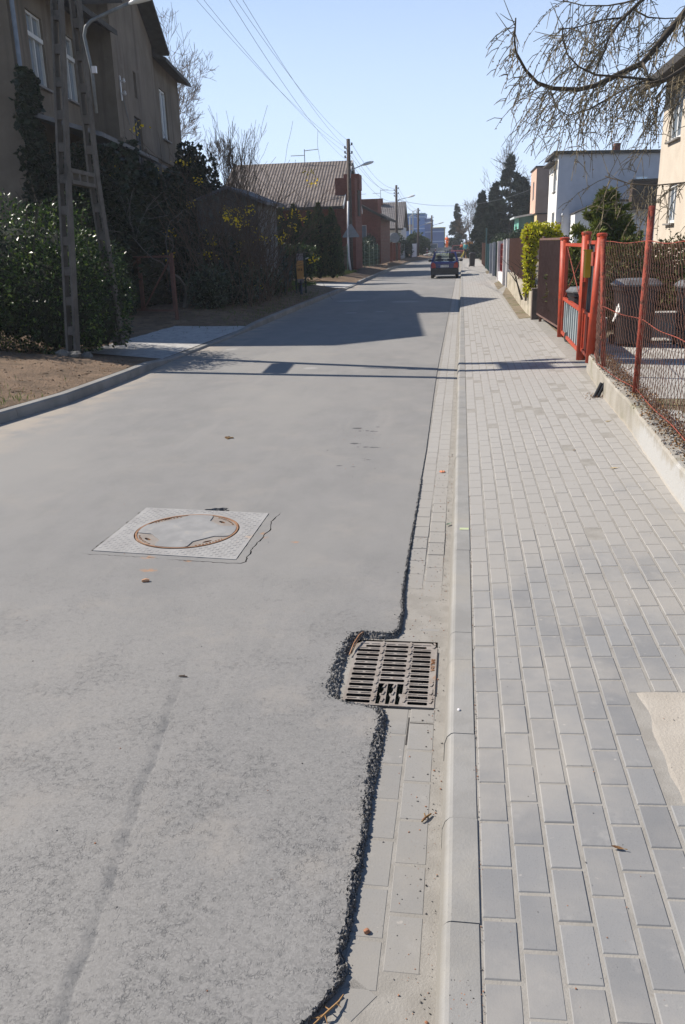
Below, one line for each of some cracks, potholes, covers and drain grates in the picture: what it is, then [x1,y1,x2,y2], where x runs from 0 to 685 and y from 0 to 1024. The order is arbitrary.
manhole cover [93,508,269,563]
drain grate [343,632,438,710]
